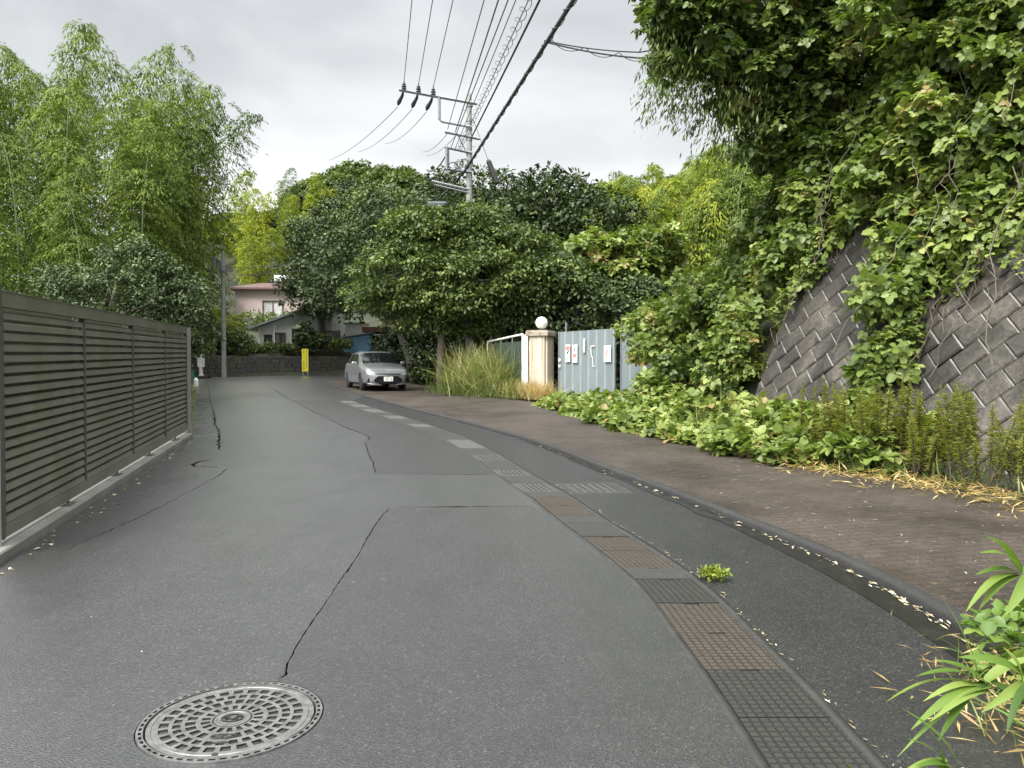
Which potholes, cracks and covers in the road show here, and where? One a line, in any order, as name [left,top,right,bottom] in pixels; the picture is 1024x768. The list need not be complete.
crack [191,388,221,467]
manhole cover [135,682,323,765]
drain grate [555,481,634,520]
crack [279,506,500,683]
